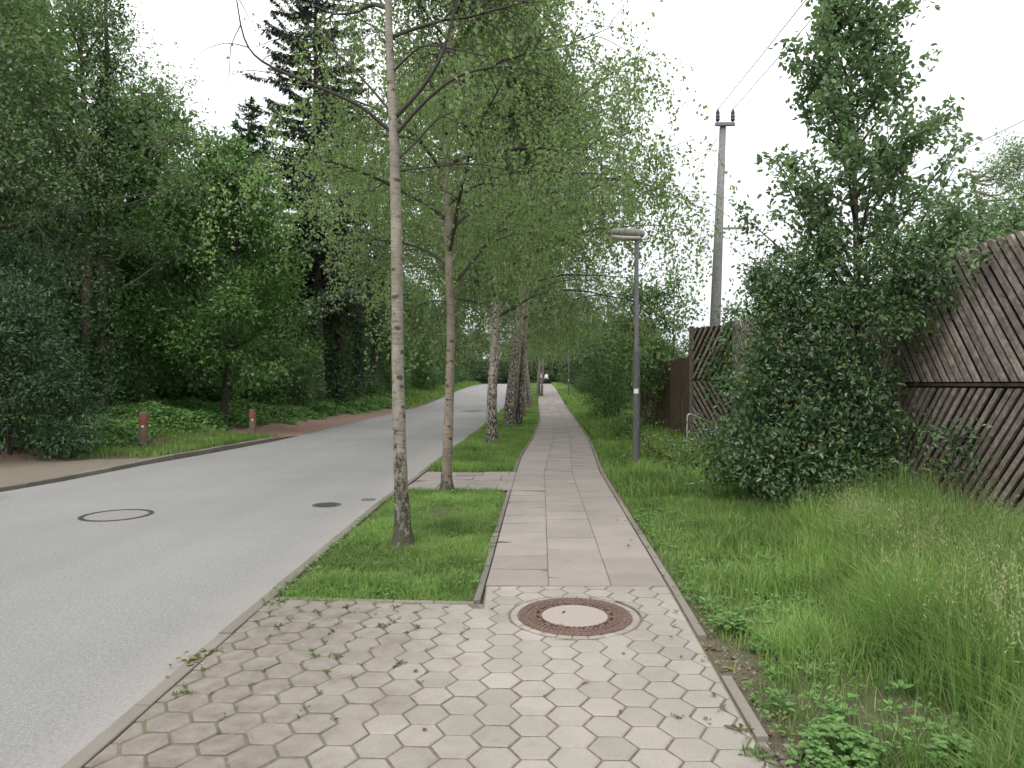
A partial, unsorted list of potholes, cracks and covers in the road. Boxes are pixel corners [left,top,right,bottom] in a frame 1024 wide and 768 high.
manhole cover [77,509,154,522]
manhole cover [518,597,632,636]
